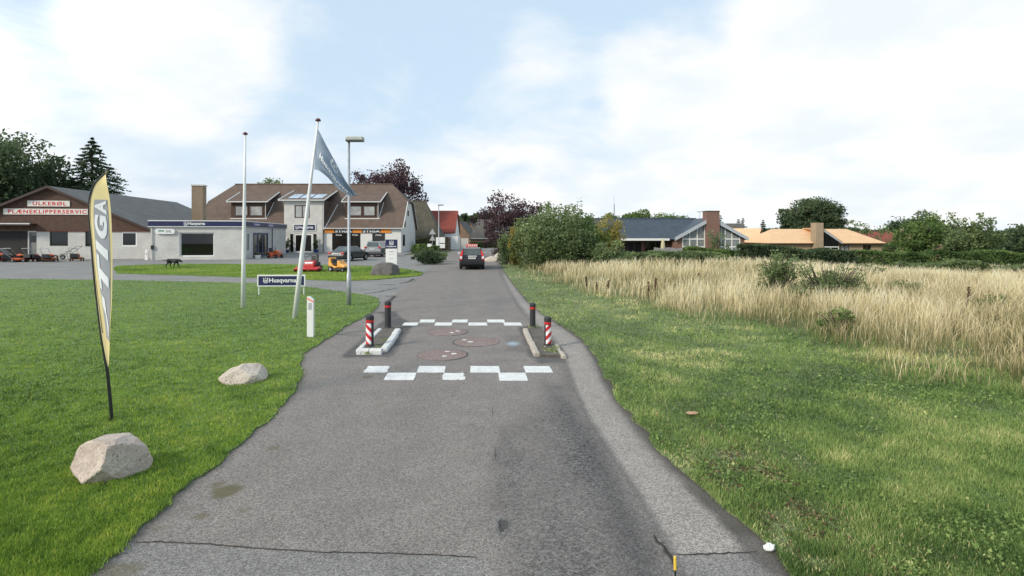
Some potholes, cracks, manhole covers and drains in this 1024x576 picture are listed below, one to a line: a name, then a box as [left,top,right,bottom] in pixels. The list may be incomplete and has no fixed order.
pothole [496,517,511,538]
crack [654,534,755,565]
manhole cover [452,337,500,347]
manhole cover [428,328,468,336]
manhole cover [418,349,468,361]
crack [138,541,479,558]
